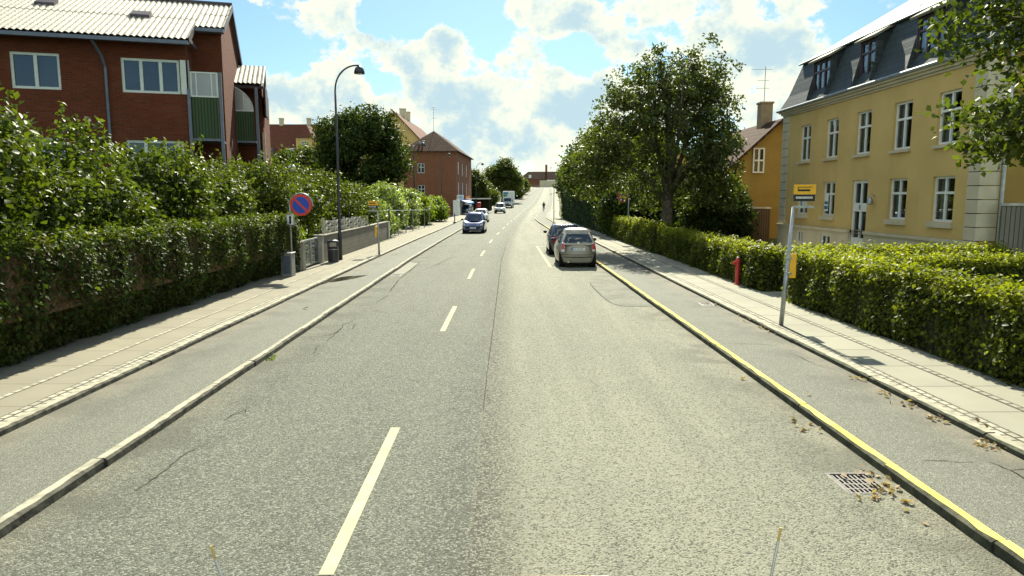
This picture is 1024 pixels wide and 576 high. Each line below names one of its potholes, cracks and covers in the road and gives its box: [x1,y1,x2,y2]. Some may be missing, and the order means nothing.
drain grate [825,472,894,494]
